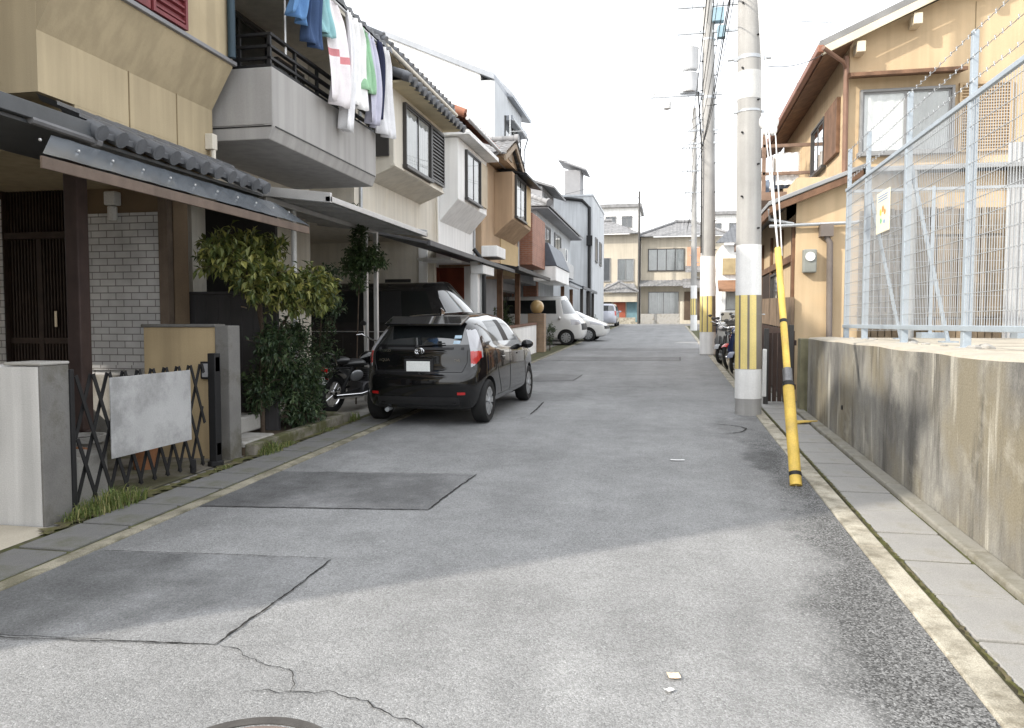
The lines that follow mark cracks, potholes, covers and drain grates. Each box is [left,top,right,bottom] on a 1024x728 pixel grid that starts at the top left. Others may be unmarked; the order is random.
crack [0,550,423,728]
manhole cover [207,717,322,728]
